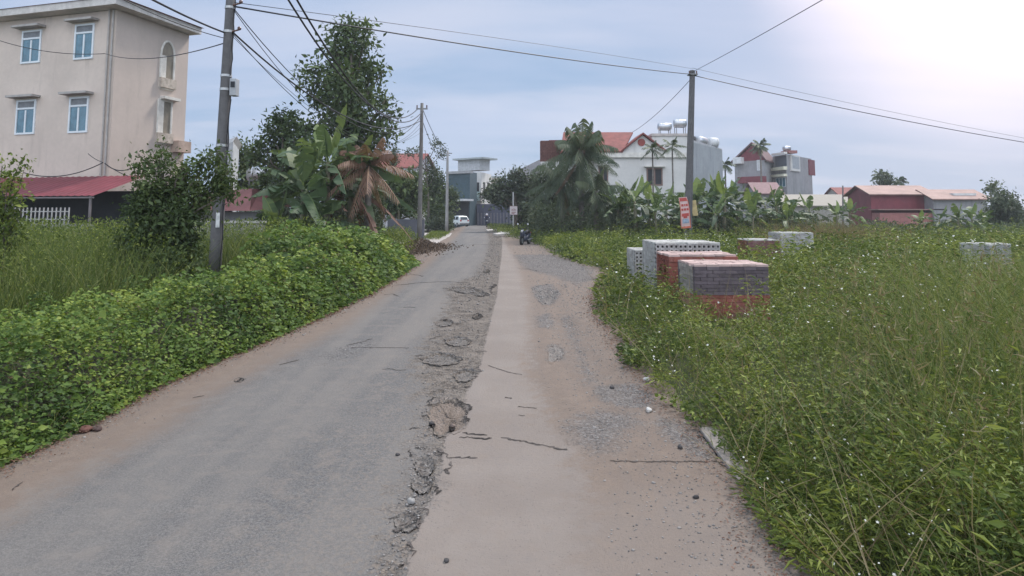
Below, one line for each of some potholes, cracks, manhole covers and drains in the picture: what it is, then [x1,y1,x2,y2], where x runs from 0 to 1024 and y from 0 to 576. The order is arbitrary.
pothole [419,351,463,367]
pothole [411,475,433,495]
pothole [414,455,434,477]
crack [349,274,567,567]
pothole [445,336,472,347]
pothole [394,510,420,533]
pothole [427,397,470,438]
